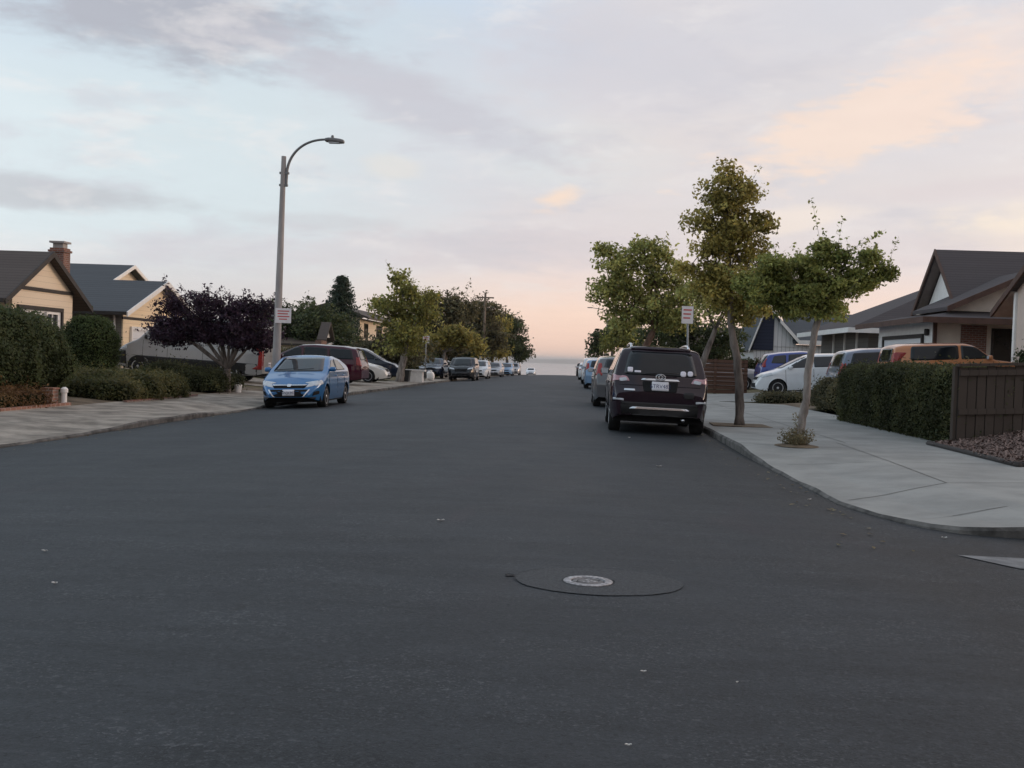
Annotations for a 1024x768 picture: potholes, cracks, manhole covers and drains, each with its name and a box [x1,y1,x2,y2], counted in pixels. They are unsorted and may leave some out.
manhole cover [562,575,615,587]
